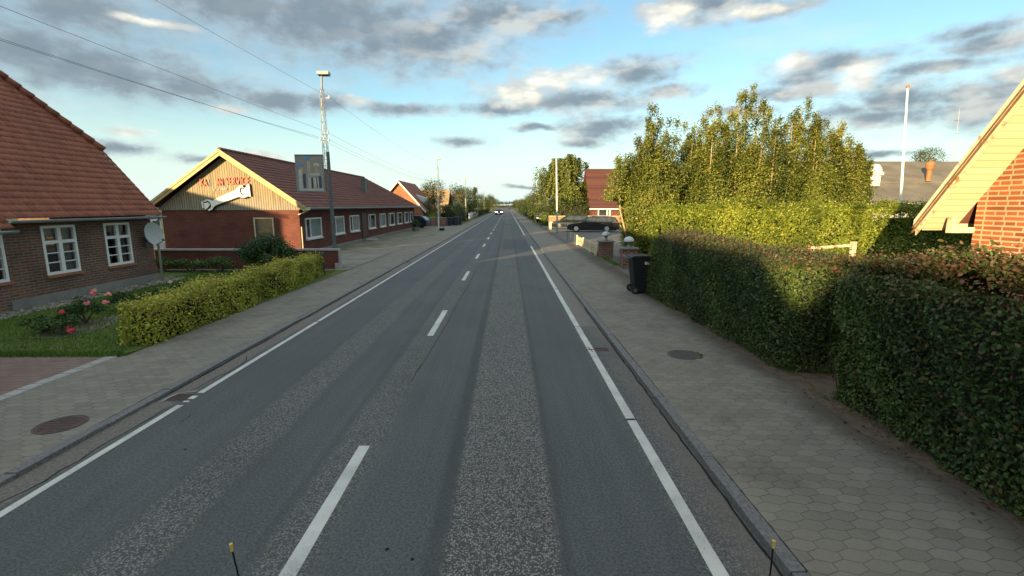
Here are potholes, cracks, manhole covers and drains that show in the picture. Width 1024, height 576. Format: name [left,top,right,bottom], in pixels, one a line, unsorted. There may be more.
manhole cover [31,415,90,435]
manhole cover [667,350,700,360]
